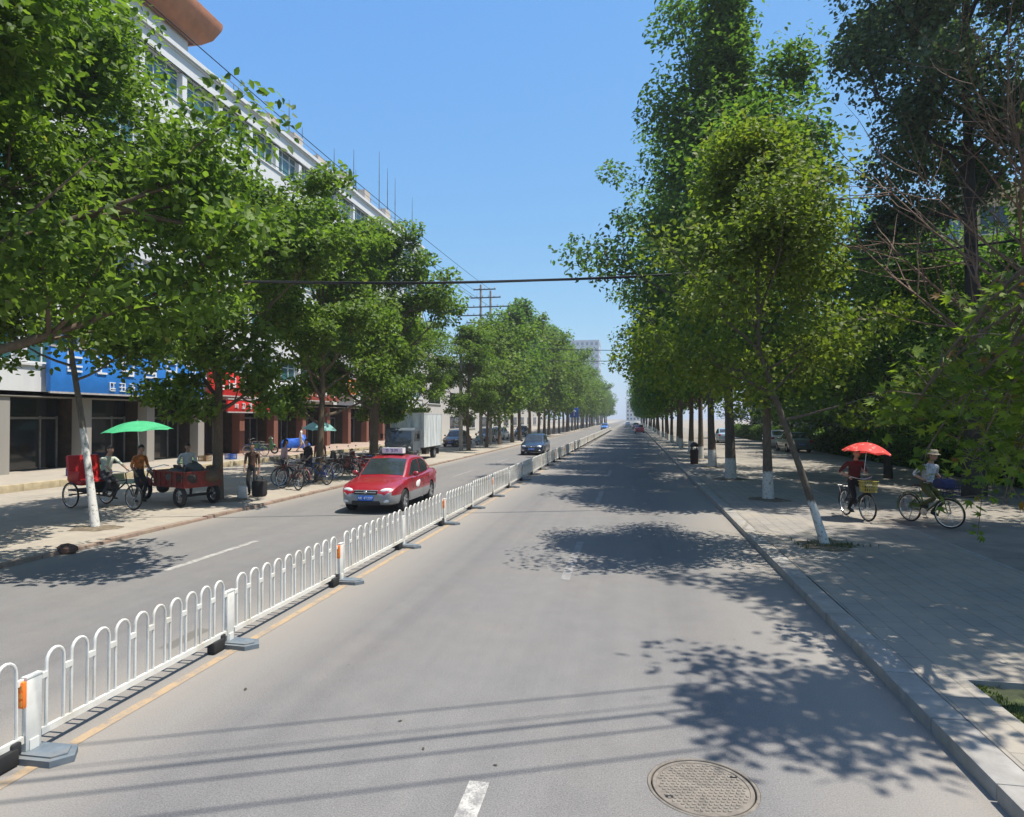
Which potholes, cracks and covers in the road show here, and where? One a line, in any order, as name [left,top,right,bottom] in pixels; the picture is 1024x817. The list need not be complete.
manhole cover [647,758,761,817]
